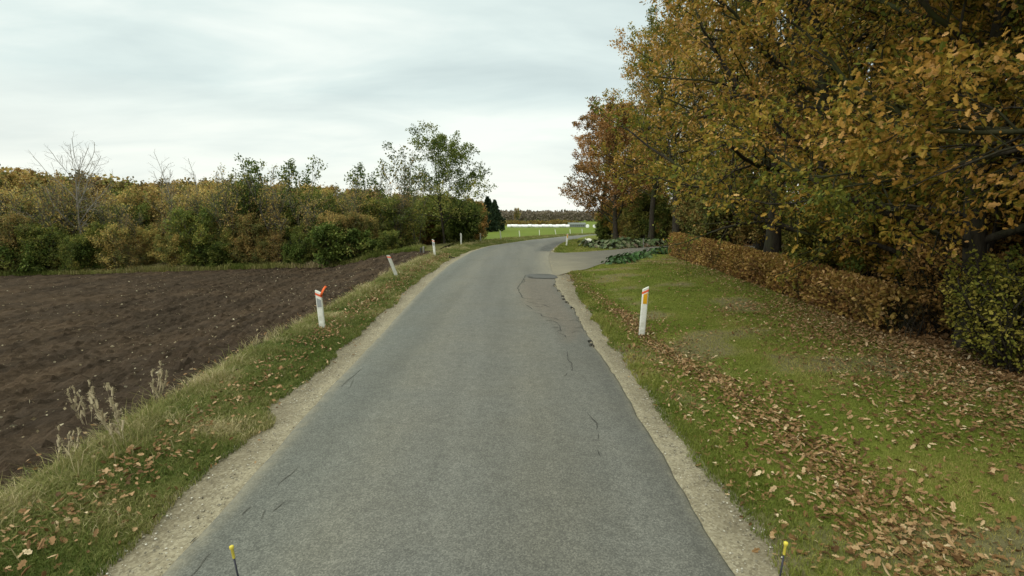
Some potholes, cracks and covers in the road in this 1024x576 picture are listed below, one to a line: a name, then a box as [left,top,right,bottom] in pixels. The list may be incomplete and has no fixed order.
crack [517,274,584,375]
